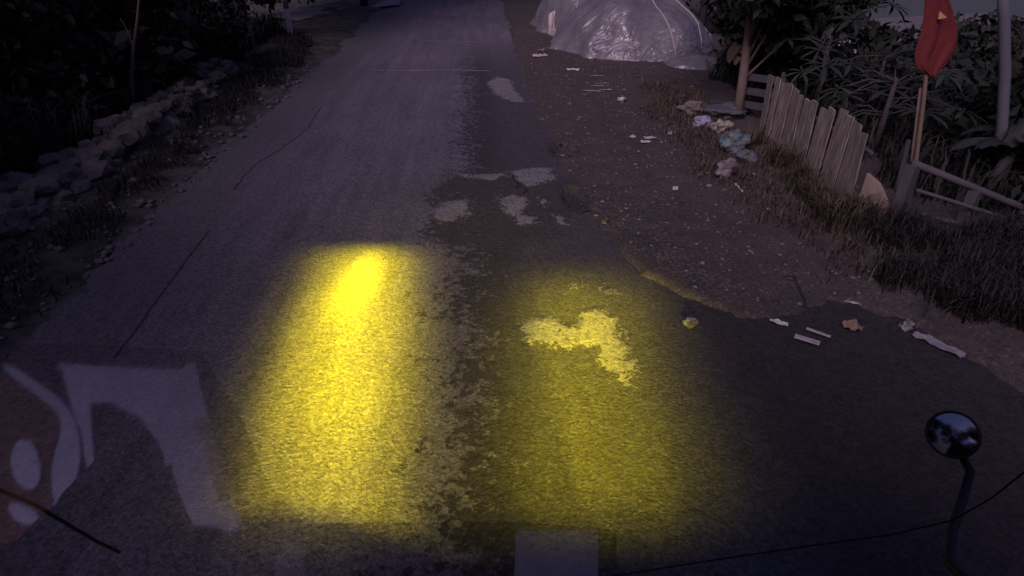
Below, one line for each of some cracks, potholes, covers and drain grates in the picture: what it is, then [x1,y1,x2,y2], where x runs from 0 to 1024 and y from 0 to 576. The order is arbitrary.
crack [233,108,320,189]
crack [112,229,210,359]
